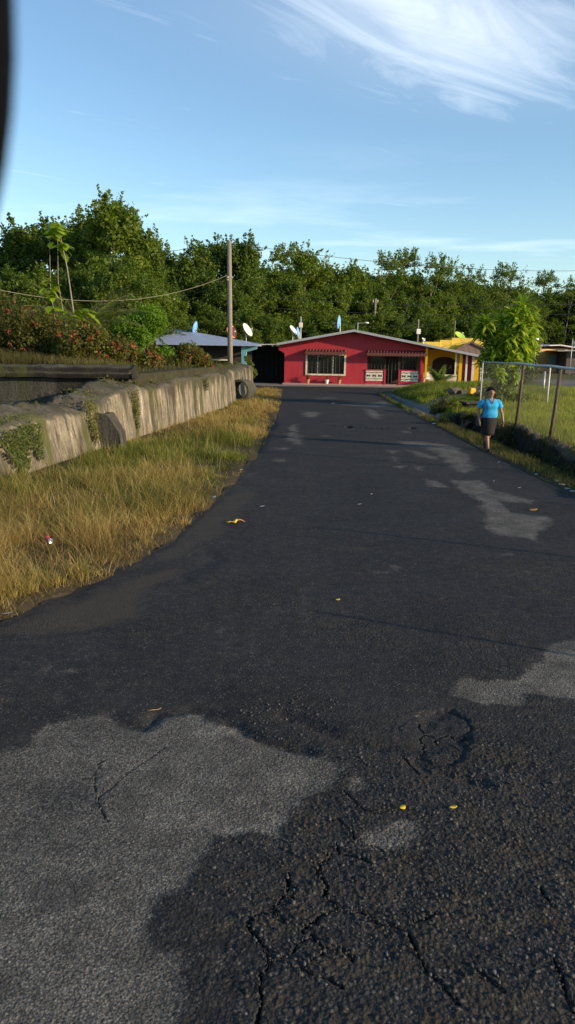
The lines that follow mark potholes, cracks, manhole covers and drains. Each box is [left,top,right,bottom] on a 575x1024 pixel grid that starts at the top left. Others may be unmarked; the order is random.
crack [479,972,504,993]
crack [92,748,164,820]
pothole [391,706,481,774]
crack [241,791,458,1024]
